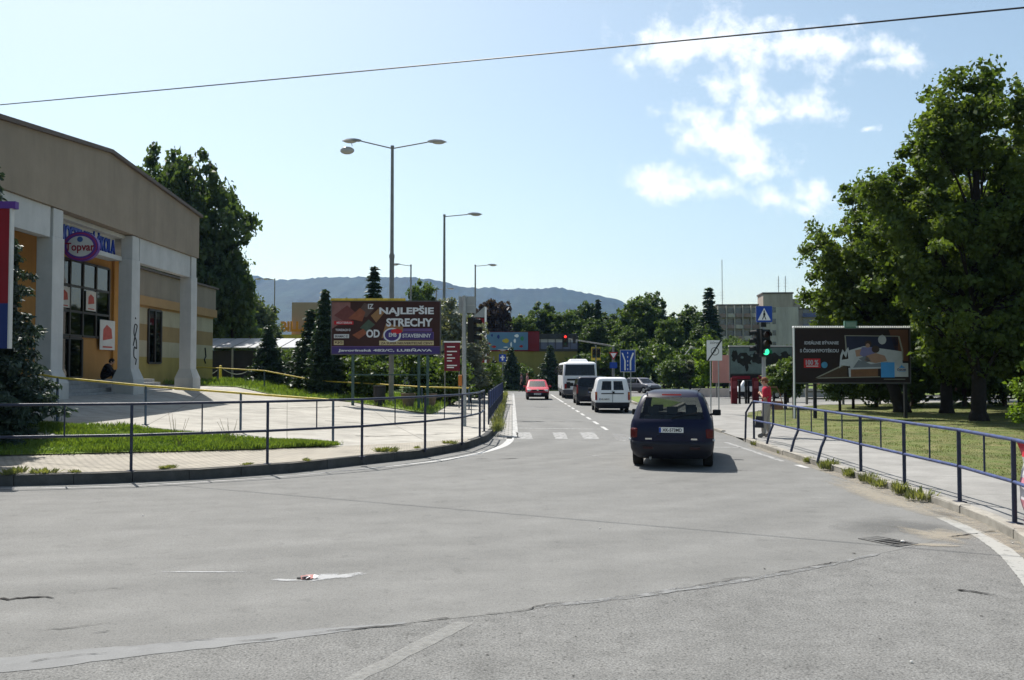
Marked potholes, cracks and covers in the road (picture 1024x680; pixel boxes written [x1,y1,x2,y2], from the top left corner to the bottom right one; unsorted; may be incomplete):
drain grate [858,536,918,547]
